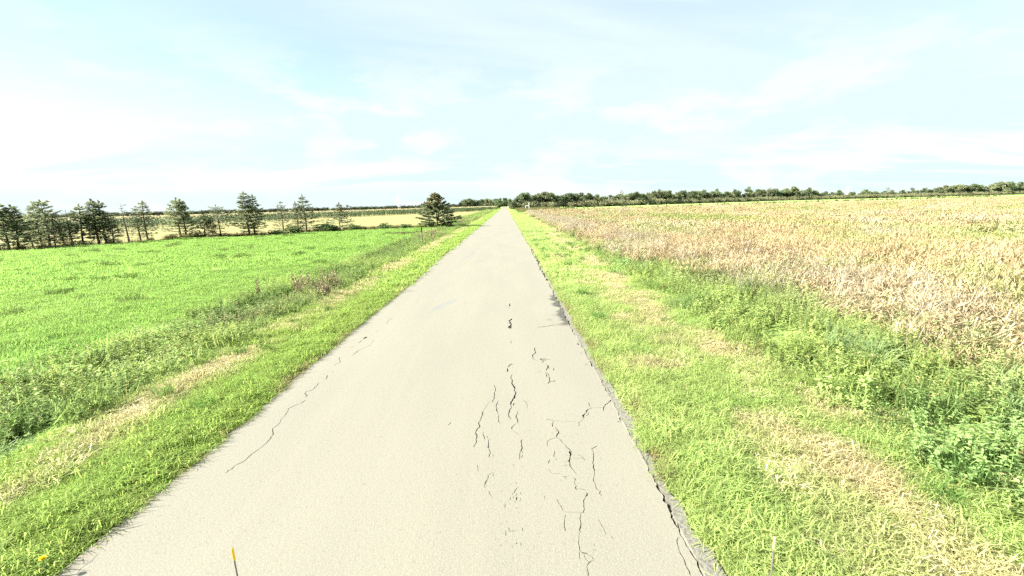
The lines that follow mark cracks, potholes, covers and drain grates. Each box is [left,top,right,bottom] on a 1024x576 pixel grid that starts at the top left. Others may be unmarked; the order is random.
crack [226,318,392,473]
crack [474,364,527,497]
crack [531,249,704,576]
